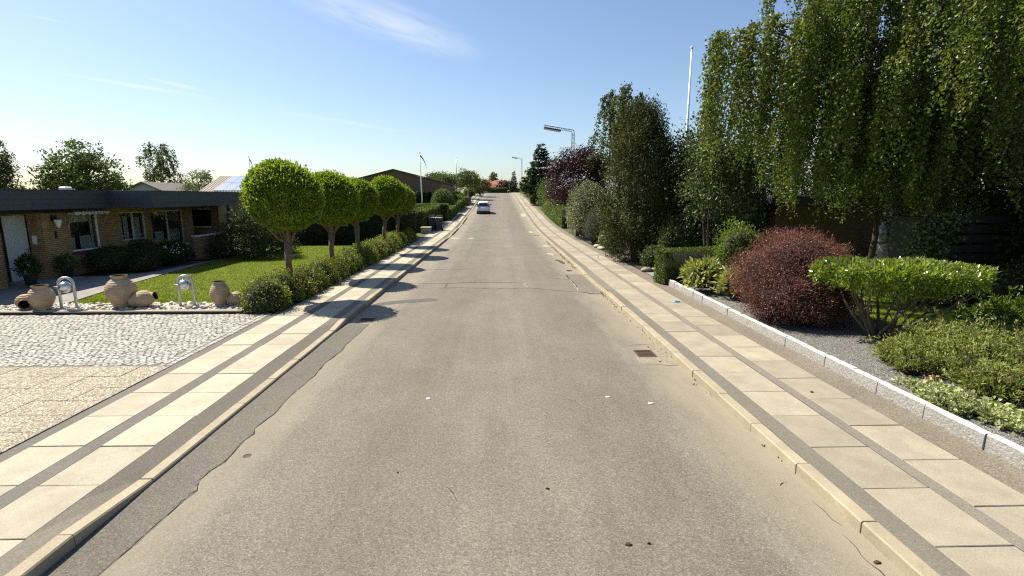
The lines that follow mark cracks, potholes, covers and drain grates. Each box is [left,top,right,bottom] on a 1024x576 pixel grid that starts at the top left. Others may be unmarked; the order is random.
crack [816,504,885,576]
crack [413,269,590,294]
